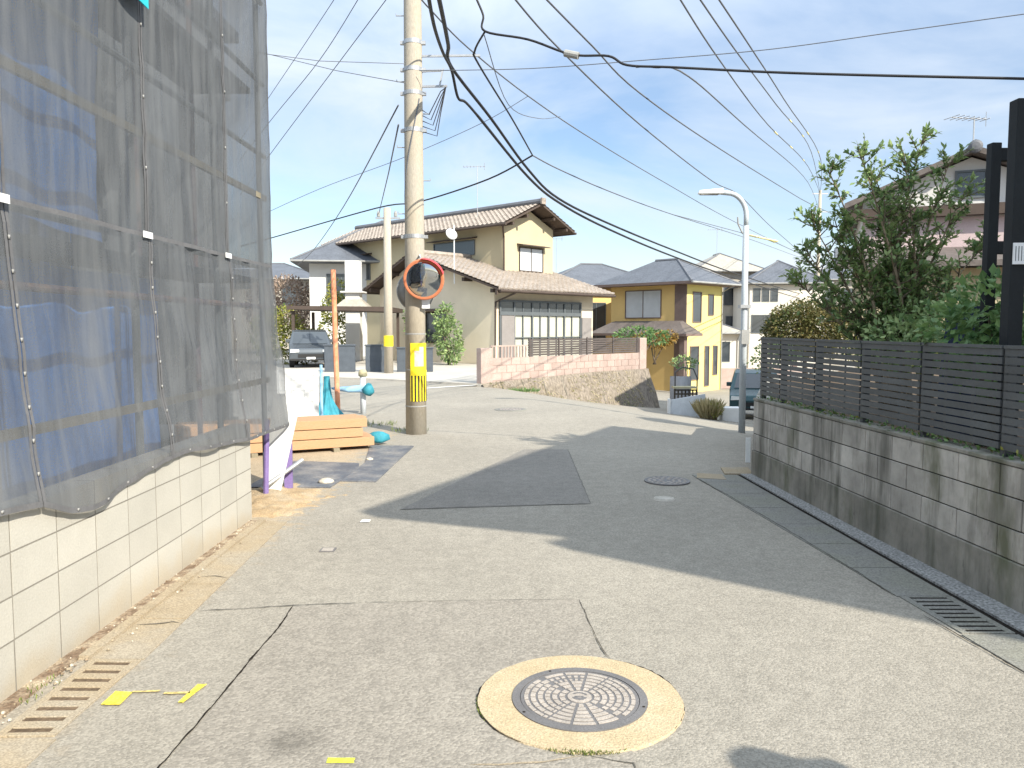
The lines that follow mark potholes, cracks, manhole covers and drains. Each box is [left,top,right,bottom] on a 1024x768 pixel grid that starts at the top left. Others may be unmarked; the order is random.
drain grate [900,596,1015,634]
drain grate [0,659,141,738]
manhole cover [476,655,685,755]
manhole cover [644,476,690,486]
